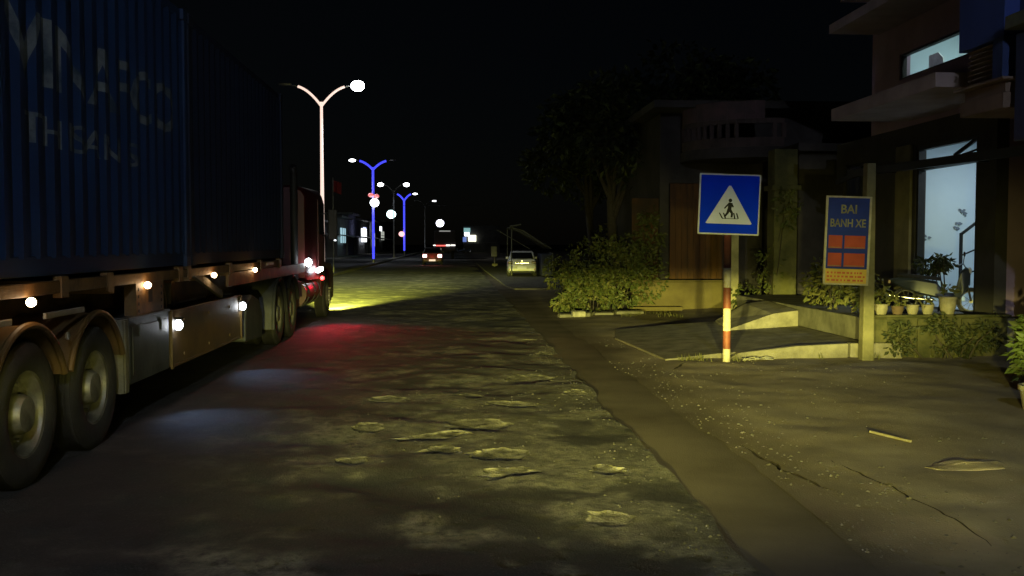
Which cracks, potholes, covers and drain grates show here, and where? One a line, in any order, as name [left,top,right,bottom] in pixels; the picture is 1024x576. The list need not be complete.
pothole [469,466,542,481]
crack [741,444,991,545]
pothole [463,447,530,461]
pothole [417,444,462,455]
pothole [589,464,627,475]
pothole [563,389,587,397]
pothole [584,510,636,528]
pothole [443,418,514,434]
pothole [391,430,473,442]
pothole [351,422,385,434]
pothole [334,457,368,465]
pothole [367,395,410,403]
